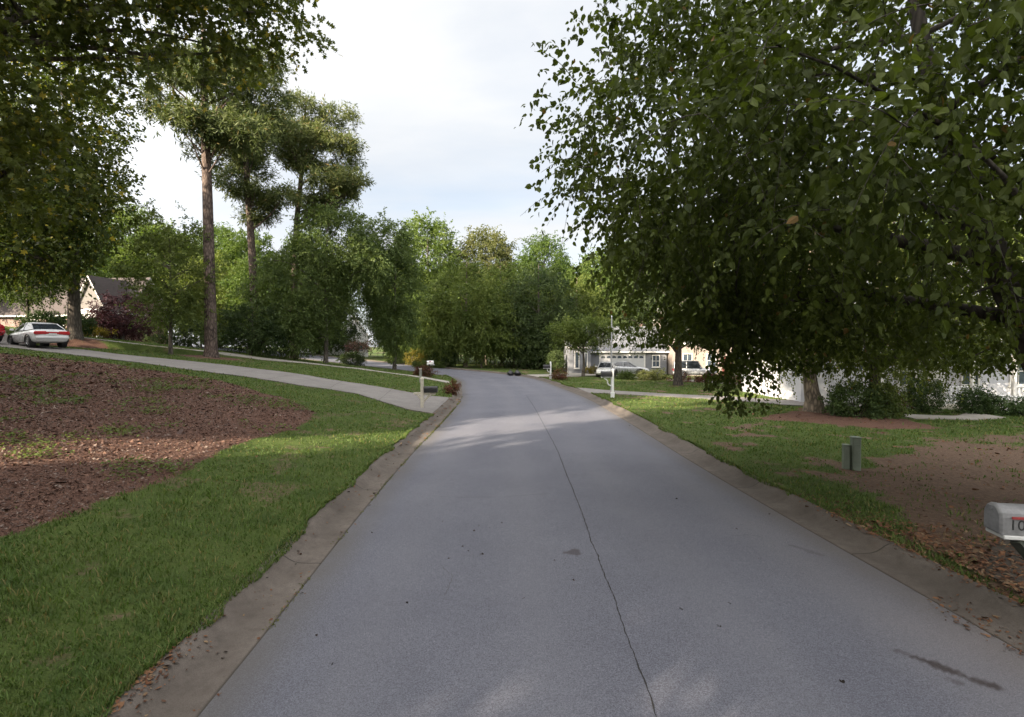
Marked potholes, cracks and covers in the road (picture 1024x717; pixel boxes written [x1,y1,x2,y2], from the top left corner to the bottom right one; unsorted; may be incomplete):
crack [526,395,657,717]
